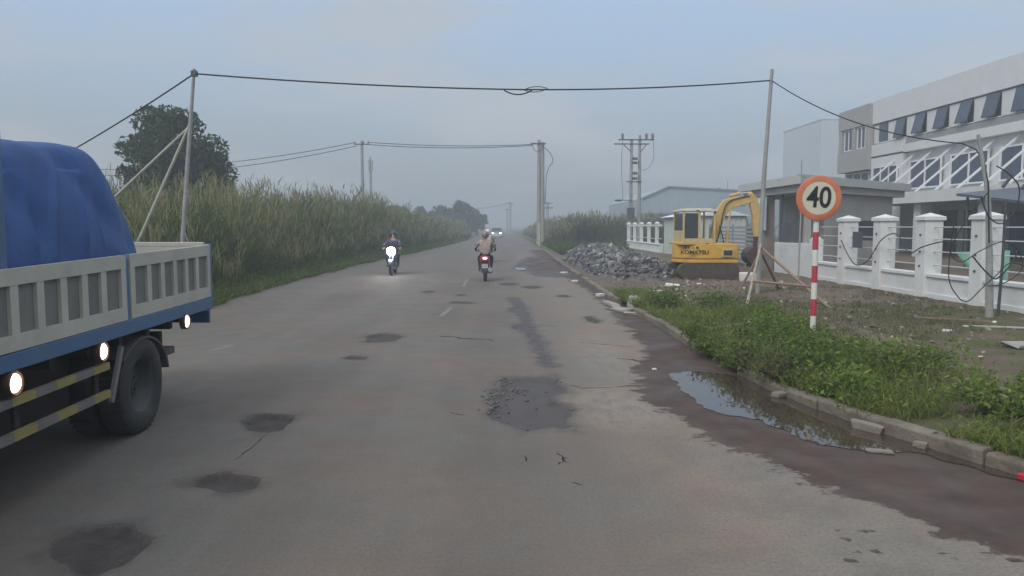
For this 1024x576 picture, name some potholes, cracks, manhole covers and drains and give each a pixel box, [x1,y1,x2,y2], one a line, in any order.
pothole [44,523,158,576]
pothole [239,413,295,433]
pothole [364,333,403,342]
pothole [478,373,580,435]
pothole [190,471,261,493]
